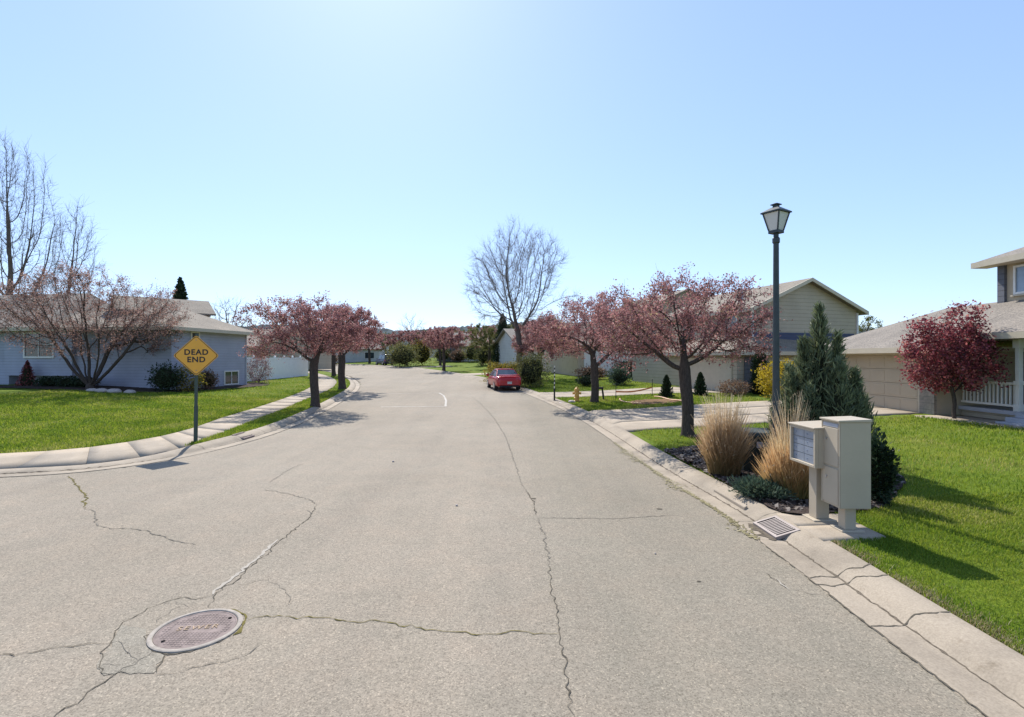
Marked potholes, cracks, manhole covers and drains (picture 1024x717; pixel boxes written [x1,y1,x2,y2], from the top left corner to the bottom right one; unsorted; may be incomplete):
crack [0,464,557,717]
drain grate [753,515,800,540]
manhole cover [146,608,243,653]
